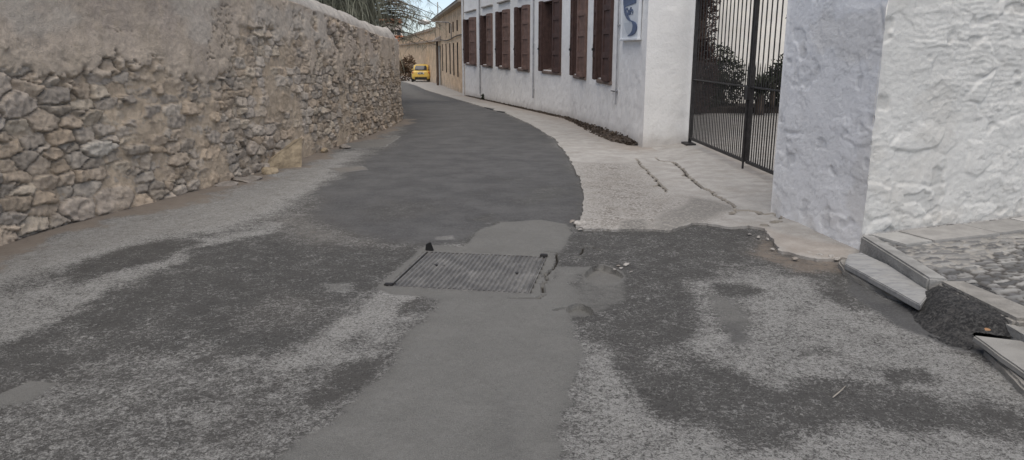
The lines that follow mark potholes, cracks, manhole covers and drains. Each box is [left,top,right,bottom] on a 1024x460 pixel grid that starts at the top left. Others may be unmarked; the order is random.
pothole [567,303,594,319]
crack [635,158,784,219]
pothole [584,265,623,283]
